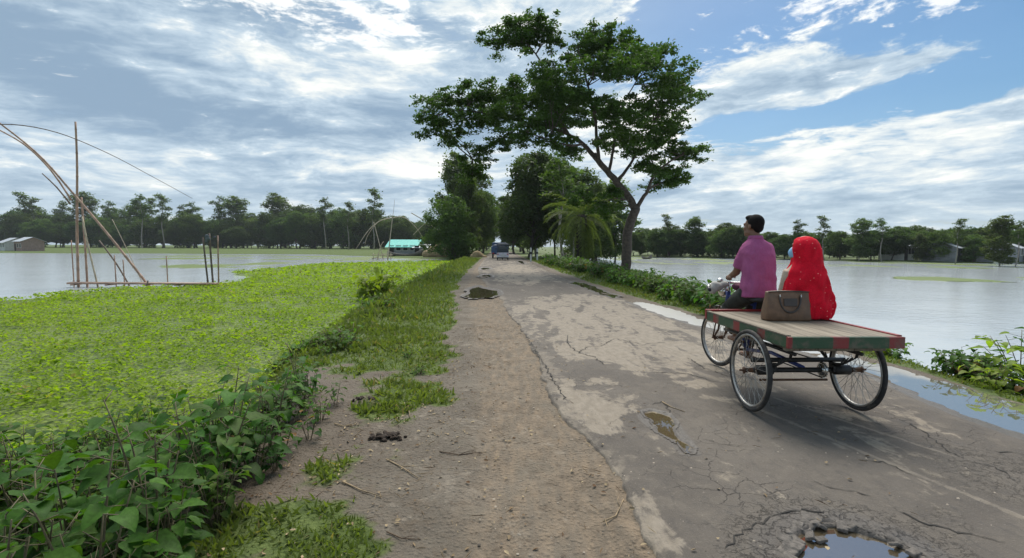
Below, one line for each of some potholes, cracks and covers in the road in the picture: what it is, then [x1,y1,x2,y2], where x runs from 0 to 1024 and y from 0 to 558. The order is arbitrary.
crack [895,508,1002,542]
crack [524,333,566,399]
crack [910,423,1013,479]
pothole [568,281,622,298]
pothole [772,510,934,558]
pothole [460,285,503,299]
pothole [639,408,698,454]
crack [725,508,824,548]
